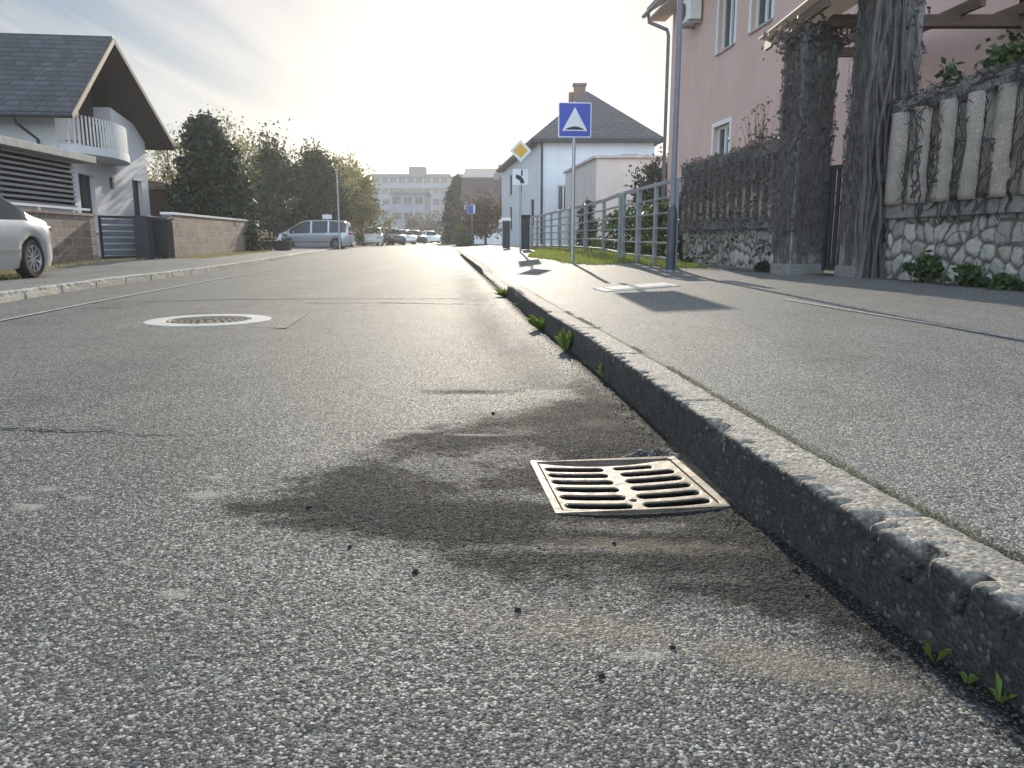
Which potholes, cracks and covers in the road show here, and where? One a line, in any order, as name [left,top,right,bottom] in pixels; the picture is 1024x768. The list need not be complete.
crack [0,427,194,436]
manhole cover [143,314,271,327]
drain grate [530,456,731,515]
